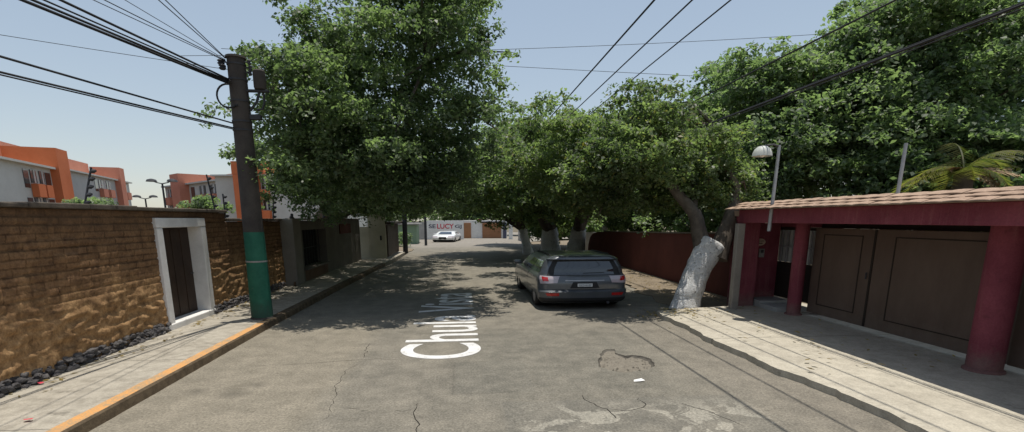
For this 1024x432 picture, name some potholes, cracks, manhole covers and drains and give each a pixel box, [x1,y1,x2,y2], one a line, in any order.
crack [582,395,646,418]
pothole [598,349,655,373]
